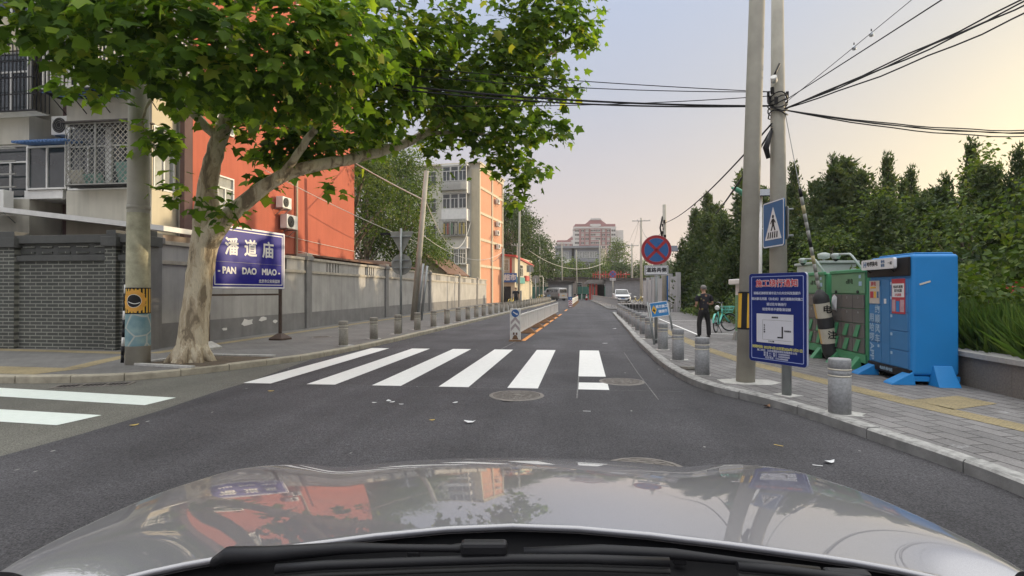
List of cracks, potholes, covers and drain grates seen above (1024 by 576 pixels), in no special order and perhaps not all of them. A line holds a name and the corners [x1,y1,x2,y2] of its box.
manhole cover [599,378,645,386]
manhole cover [489,390,544,401]
manhole cover [611,457,683,467]
